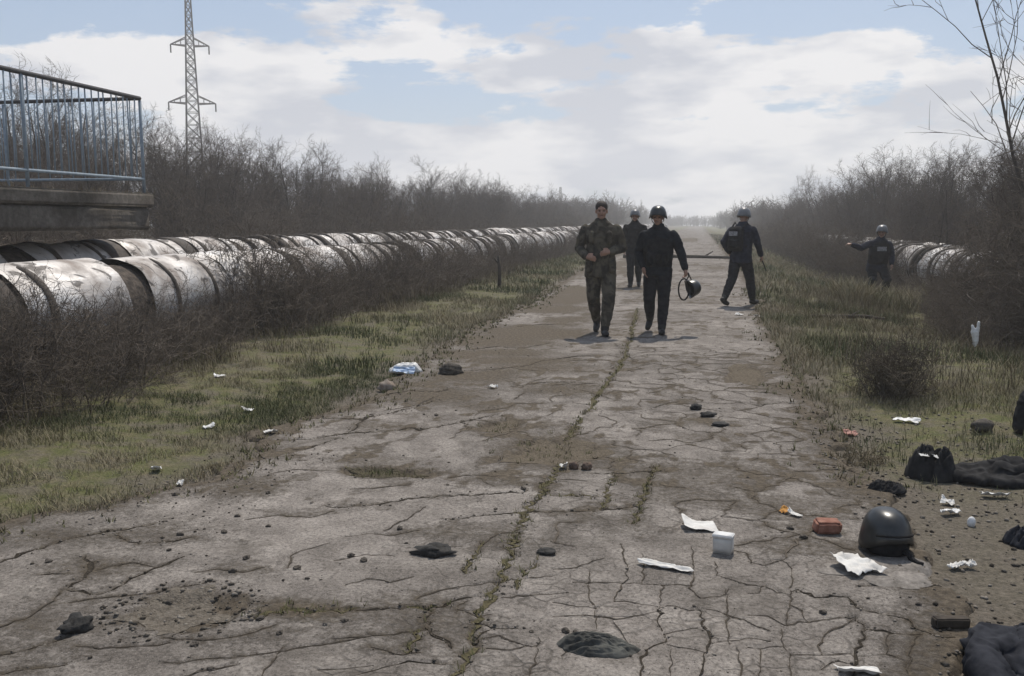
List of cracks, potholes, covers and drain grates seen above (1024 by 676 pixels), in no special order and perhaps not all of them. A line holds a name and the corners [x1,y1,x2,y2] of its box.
pothole [345,467,428,478]
crack [0,309,955,676]
